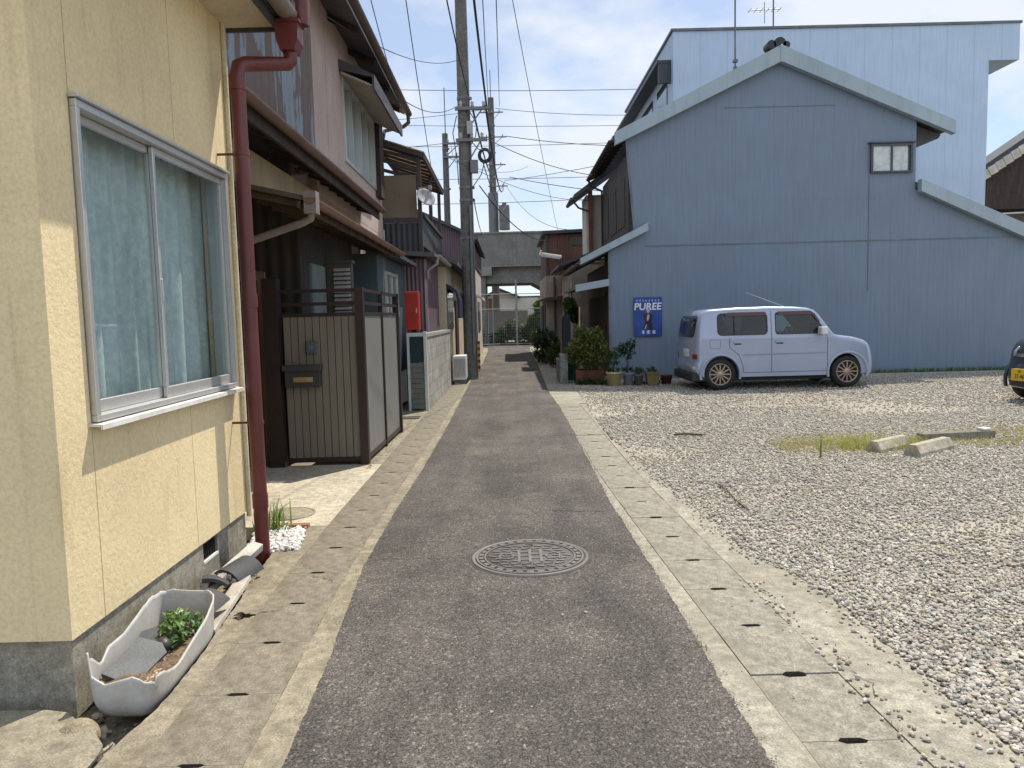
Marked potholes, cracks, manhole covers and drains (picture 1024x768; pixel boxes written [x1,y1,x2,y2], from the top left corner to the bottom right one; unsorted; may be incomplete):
manhole cover [268,507,316,521]
manhole cover [469,539,592,577]
